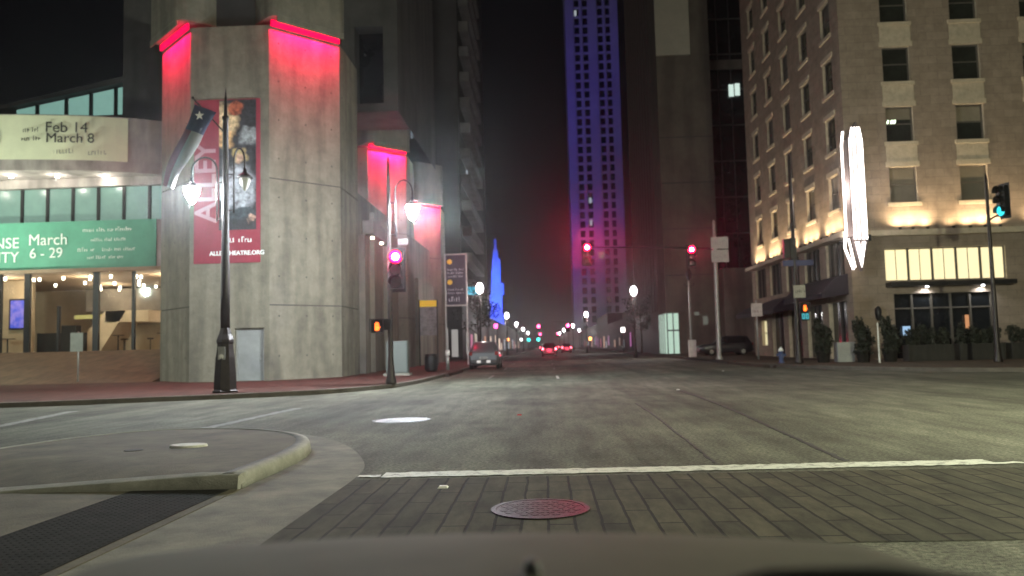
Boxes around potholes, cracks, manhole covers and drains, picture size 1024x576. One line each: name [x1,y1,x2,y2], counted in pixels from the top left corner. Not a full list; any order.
manhole cover [491,499,590,520]
